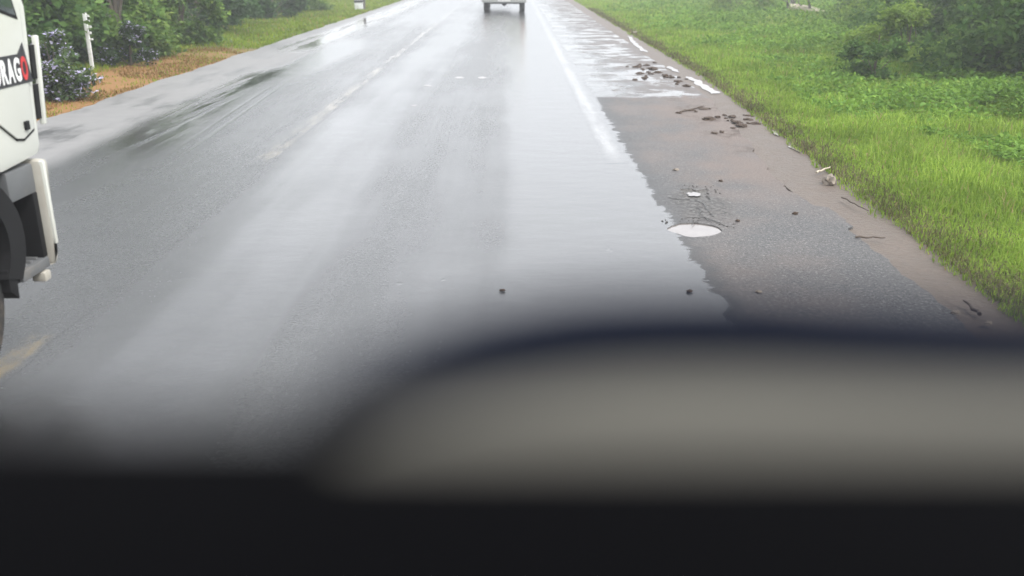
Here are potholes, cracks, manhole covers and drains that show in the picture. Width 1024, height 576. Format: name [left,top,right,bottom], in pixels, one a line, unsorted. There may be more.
crack [669,197,722,226]
